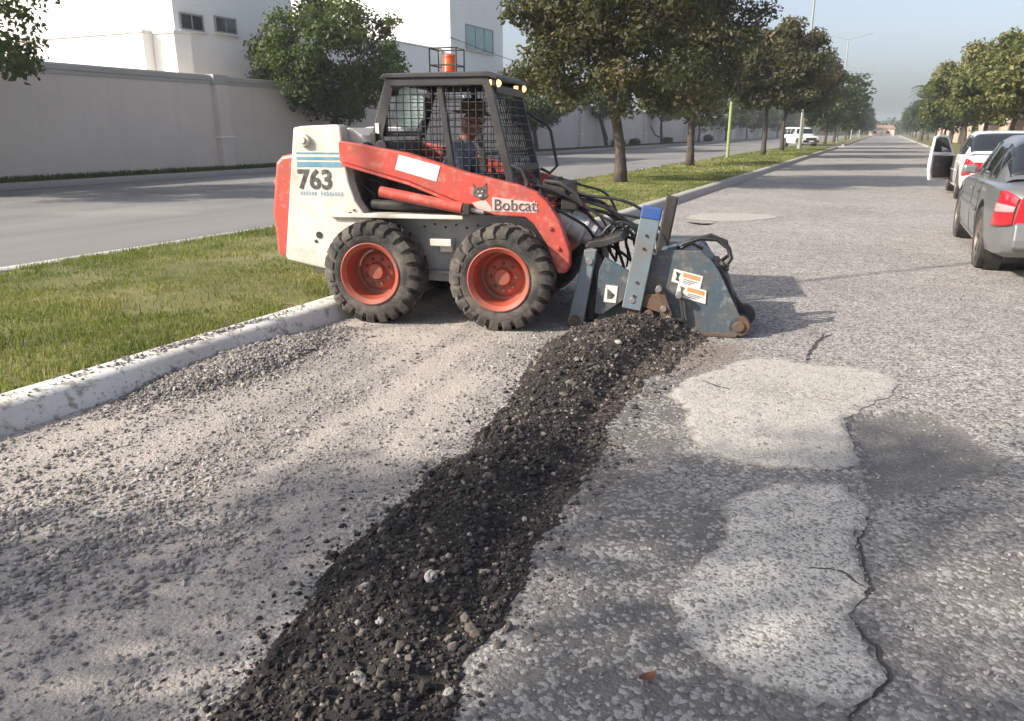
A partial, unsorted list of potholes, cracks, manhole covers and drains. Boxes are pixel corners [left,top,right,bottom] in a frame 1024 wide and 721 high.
crack [806,333,832,360]
crack [810,517,892,721]
